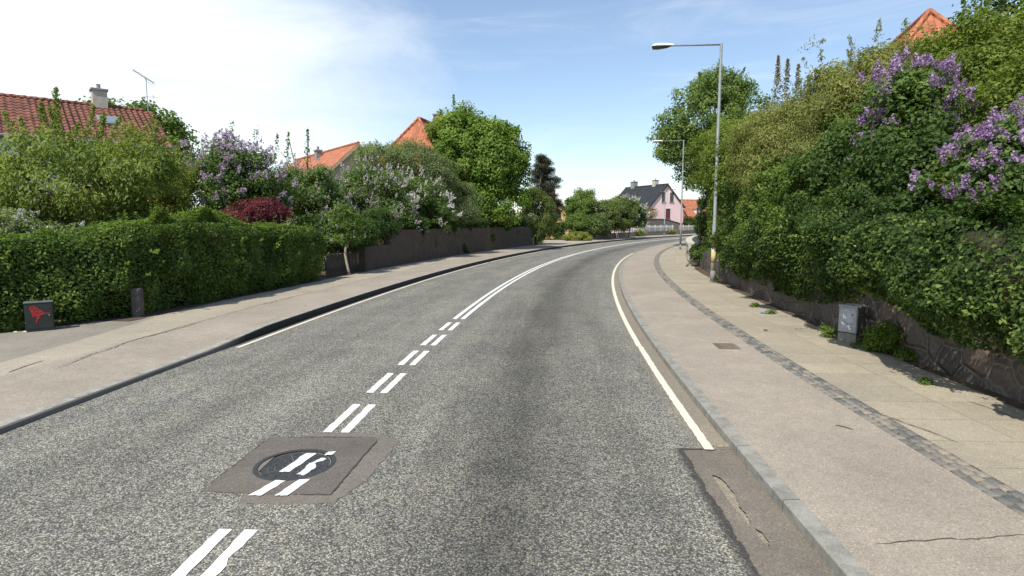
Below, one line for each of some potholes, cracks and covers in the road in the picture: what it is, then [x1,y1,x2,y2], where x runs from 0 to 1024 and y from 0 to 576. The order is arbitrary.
crack [876,534,1024,544]
manhole cover [253,449,336,481]
